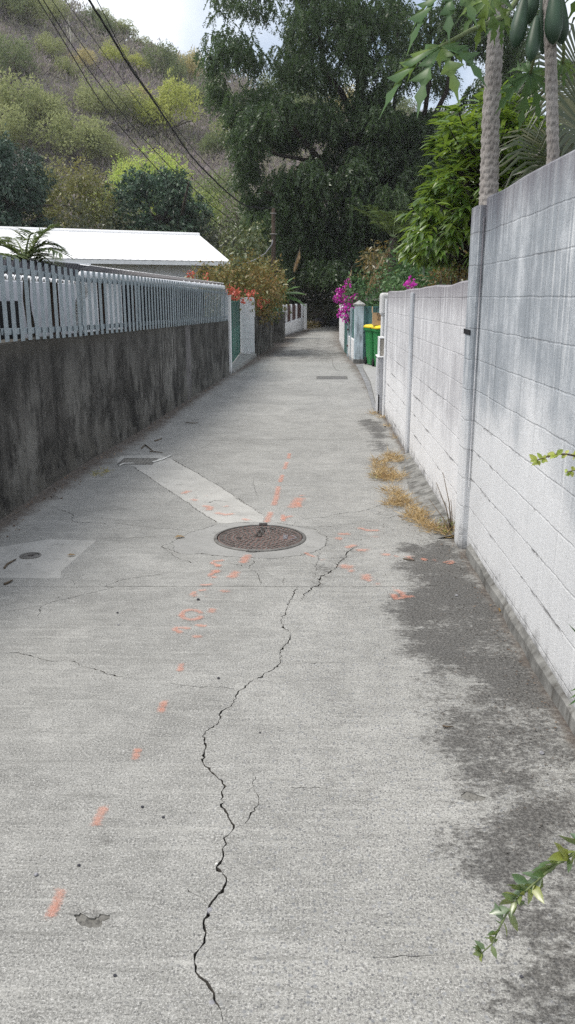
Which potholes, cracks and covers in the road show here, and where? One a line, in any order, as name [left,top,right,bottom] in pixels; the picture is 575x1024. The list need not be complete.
crack [11,652,122,677]
pothole [74,913,110,928]
manhole cover [214,523,306,553]
crack [135,460,394,1024]
